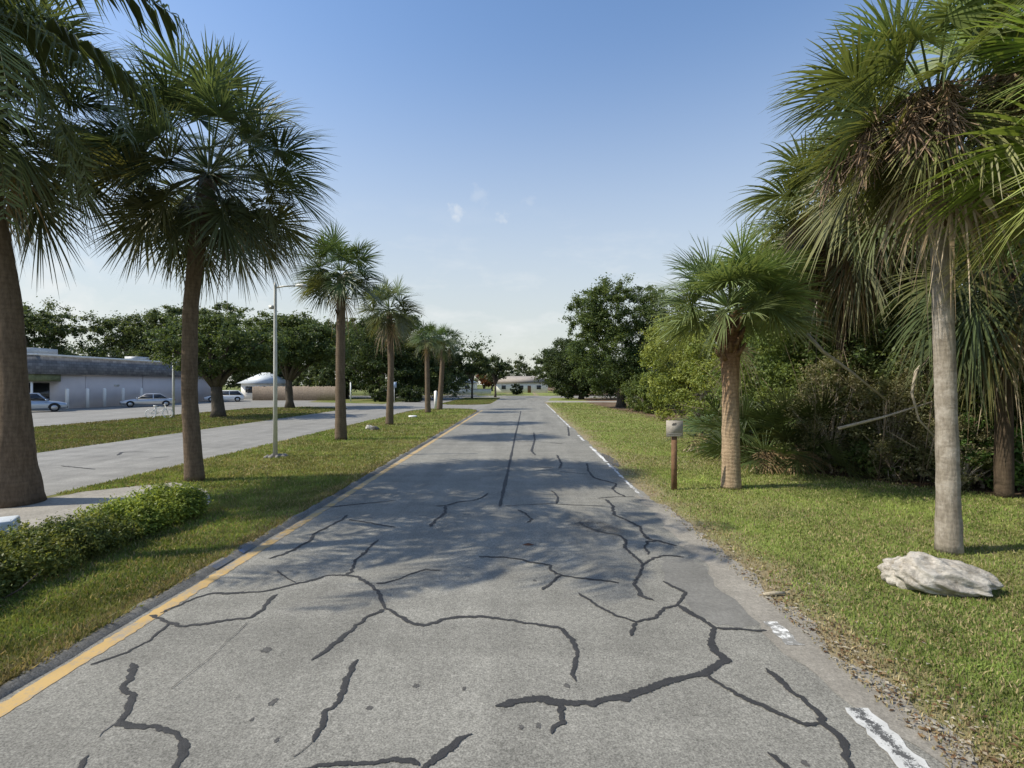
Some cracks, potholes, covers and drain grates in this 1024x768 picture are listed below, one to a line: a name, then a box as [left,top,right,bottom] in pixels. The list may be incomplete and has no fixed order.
crack [704,668,854,768]
crack [78,755,89,768]
crack [90,427,687,768]
